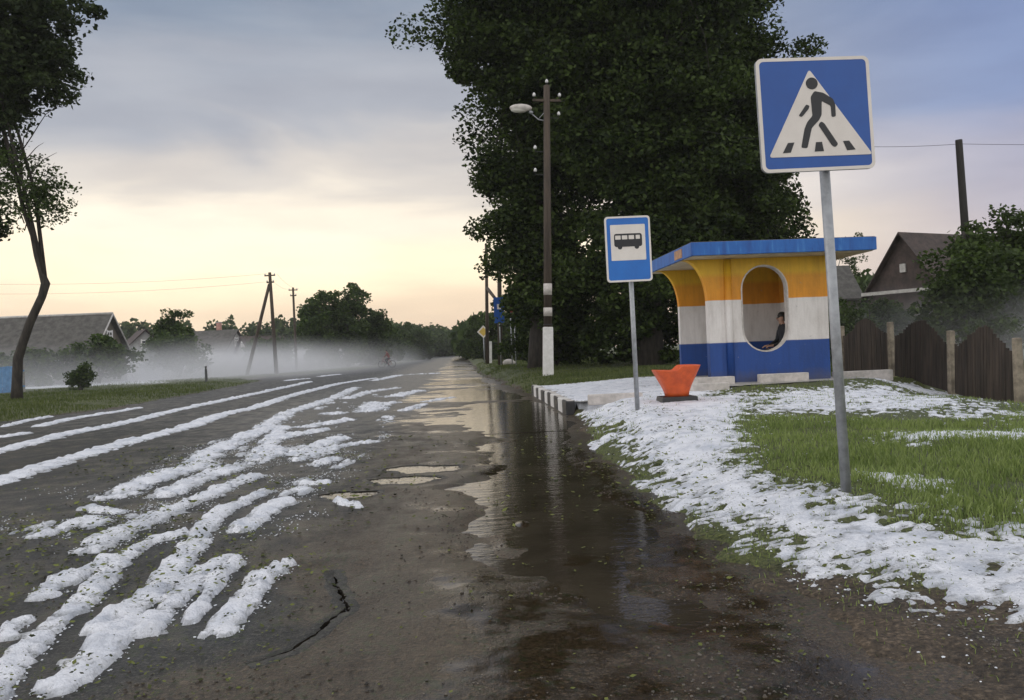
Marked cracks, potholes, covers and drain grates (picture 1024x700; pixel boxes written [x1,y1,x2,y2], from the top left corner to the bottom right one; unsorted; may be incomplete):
crack [242,569,360,669]
pothole [362,475,449,486]
pothole [312,489,385,501]
pothole [375,464,469,475]
